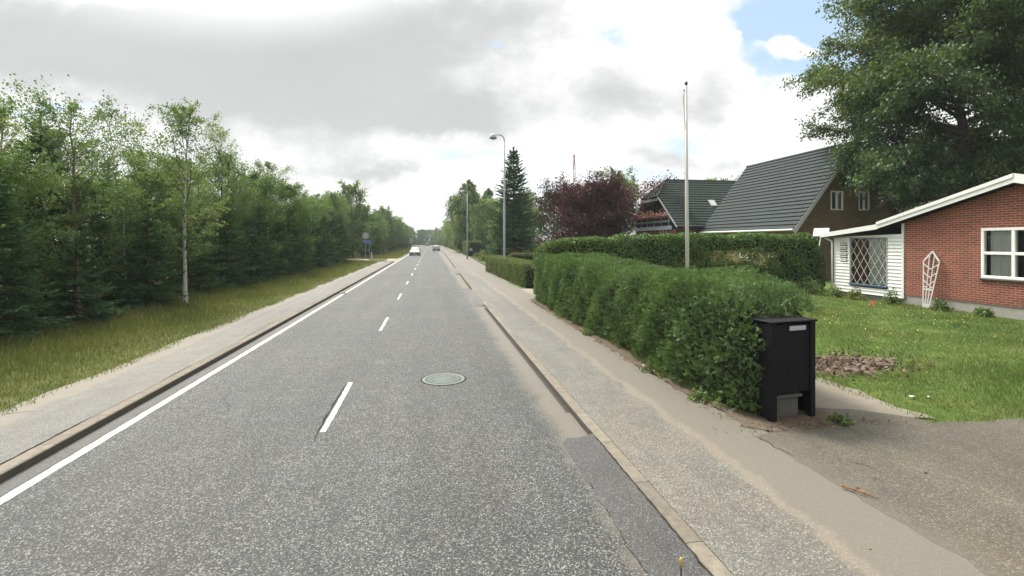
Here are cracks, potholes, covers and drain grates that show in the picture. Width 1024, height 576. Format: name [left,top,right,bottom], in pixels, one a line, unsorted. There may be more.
manhole cover [420,373,467,386]
